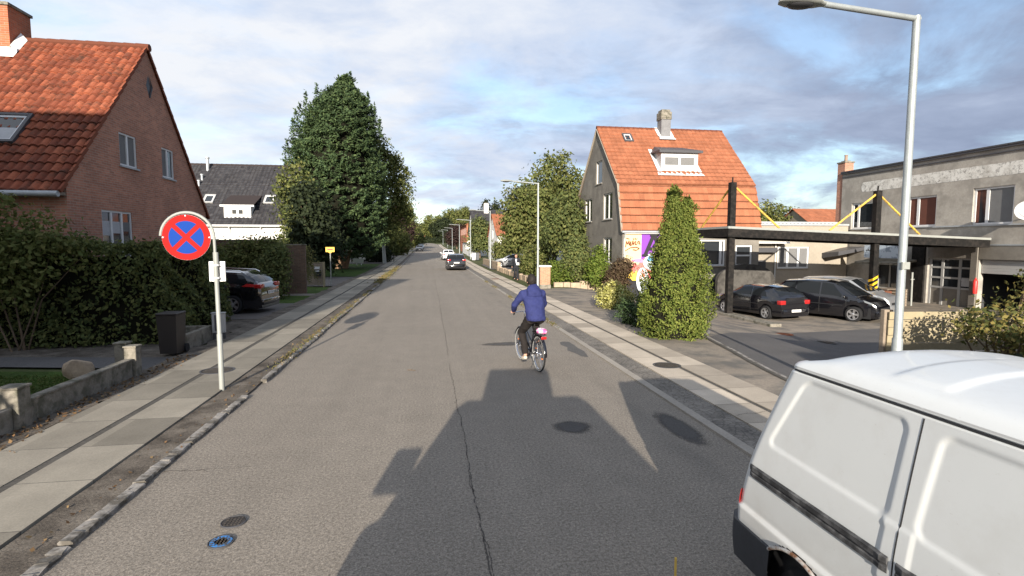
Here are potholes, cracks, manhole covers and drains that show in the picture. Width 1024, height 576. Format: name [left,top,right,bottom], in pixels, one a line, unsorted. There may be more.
crack [435,283,495,576]
